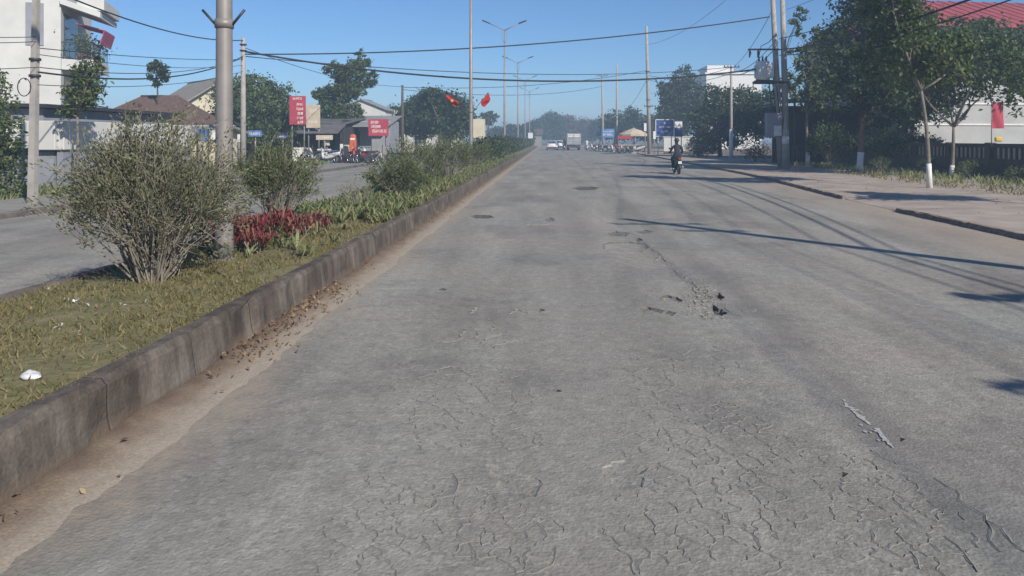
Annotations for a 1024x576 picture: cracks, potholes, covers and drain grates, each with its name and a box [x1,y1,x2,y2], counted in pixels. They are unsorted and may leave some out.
crack [317,470,579,576]
crack [386,305,545,455]
pothole [640,306,676,316]
crack [652,249,757,319]
pothole [658,295,683,304]
crack [595,346,1024,576]
